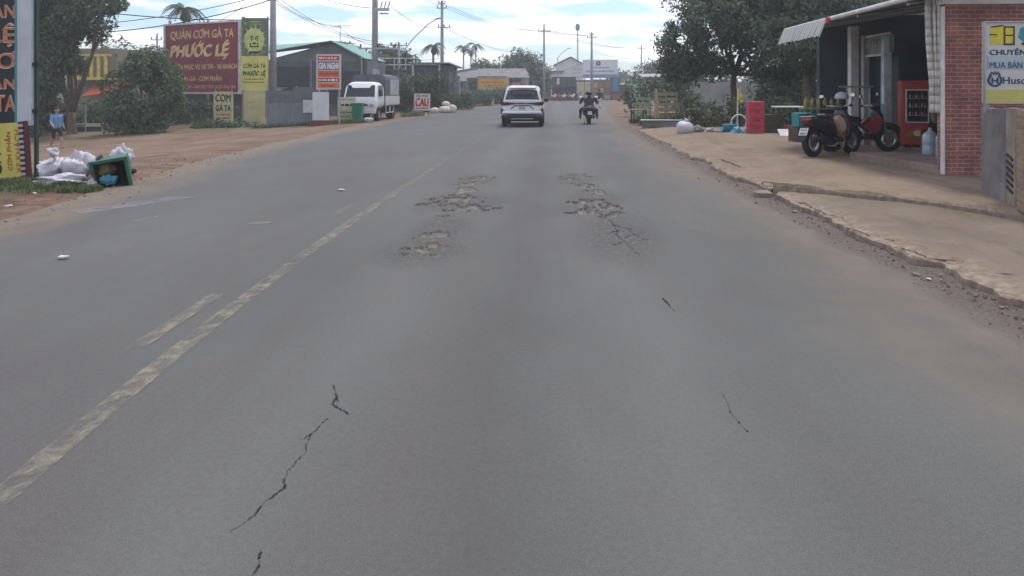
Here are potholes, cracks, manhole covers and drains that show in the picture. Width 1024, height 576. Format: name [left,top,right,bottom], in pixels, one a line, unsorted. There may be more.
pothole [405,230,453,239]
pothole [563,198,626,218]
pothole [451,181,484,194]
pothole [413,193,503,212]
crack [595,219,648,257]
crack [229,384,350,533]
pothole [570,182,606,195]
crack [251,550,262,576]
crack [721,392,749,433]
pothole [380,241,450,256]
